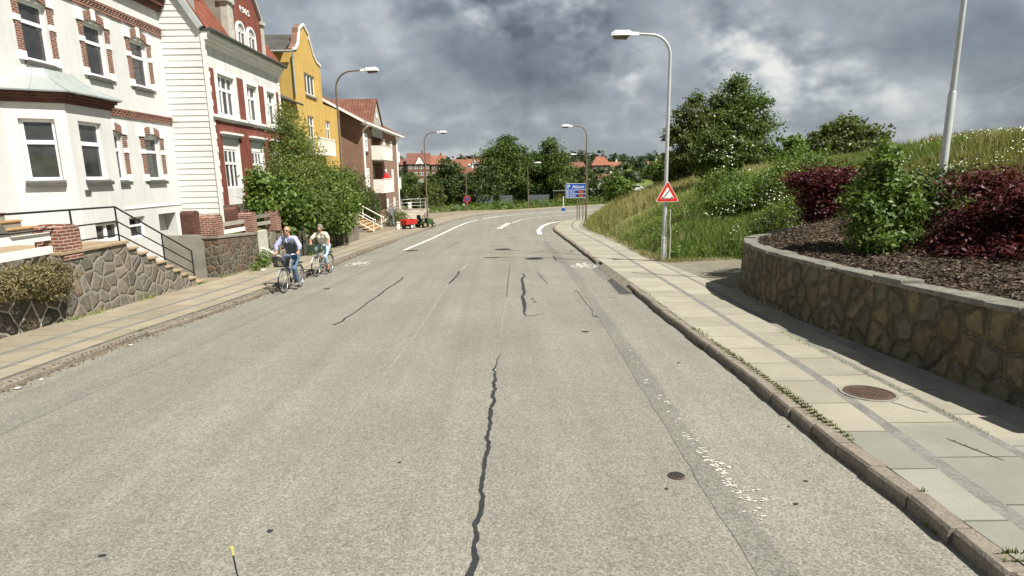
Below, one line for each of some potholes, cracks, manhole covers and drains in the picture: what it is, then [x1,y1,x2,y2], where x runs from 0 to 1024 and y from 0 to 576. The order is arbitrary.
manhole cover [839,384,899,402]
utility cover [668,471,685,480]
